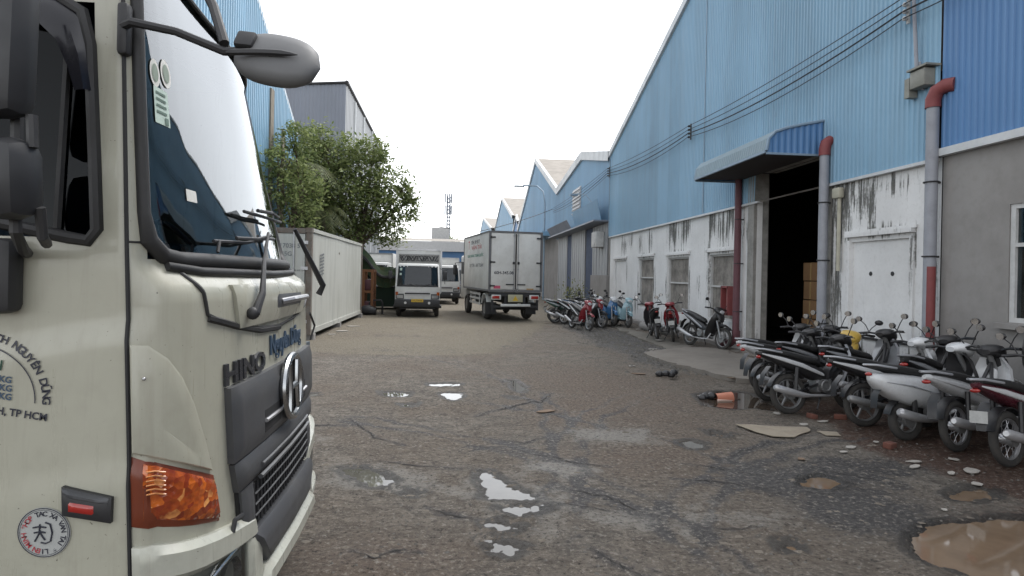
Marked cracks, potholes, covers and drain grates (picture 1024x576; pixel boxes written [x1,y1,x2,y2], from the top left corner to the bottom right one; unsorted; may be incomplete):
pothole [470,513,540,542]
crack [558,489,643,513]
crack [475,436,602,466]
pothole [782,471,861,495]
pothole [324,462,411,494]
pothole [463,529,547,562]
pothole [370,389,418,398]
pothole [888,510,1024,576]
pothole [922,482,1018,508]
pothole [464,466,552,507]
pothole [433,391,473,403]
pothole [688,390,767,412]
